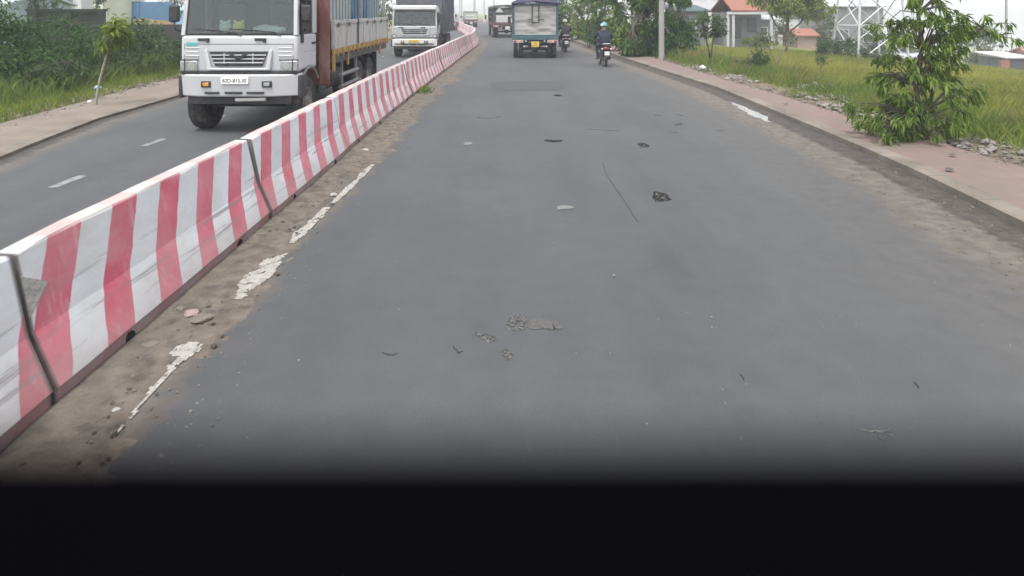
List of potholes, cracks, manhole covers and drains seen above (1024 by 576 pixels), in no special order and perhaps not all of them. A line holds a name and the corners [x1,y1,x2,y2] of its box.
pothole [498,348,514,360]
crack [856,427,898,440]
pothole [471,332,497,343]
pothole [652,191,672,202]
pothole [505,315,528,331]
